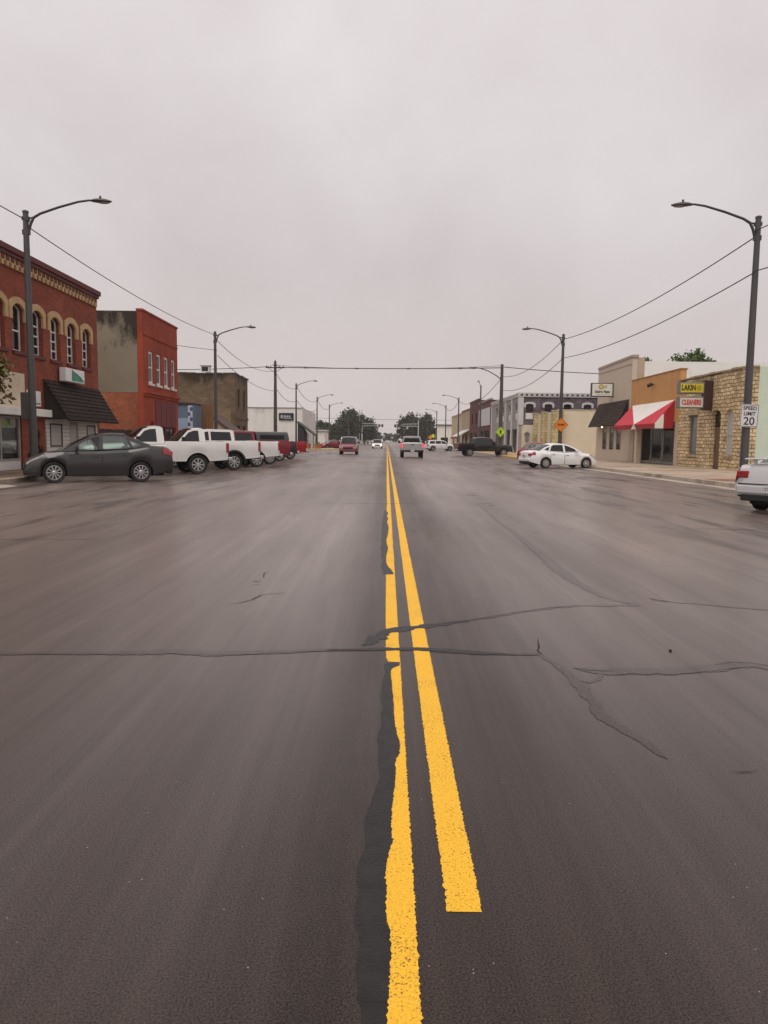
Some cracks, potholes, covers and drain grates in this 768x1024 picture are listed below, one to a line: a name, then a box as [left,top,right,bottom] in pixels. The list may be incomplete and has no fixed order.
crack [650,598,765,610]
